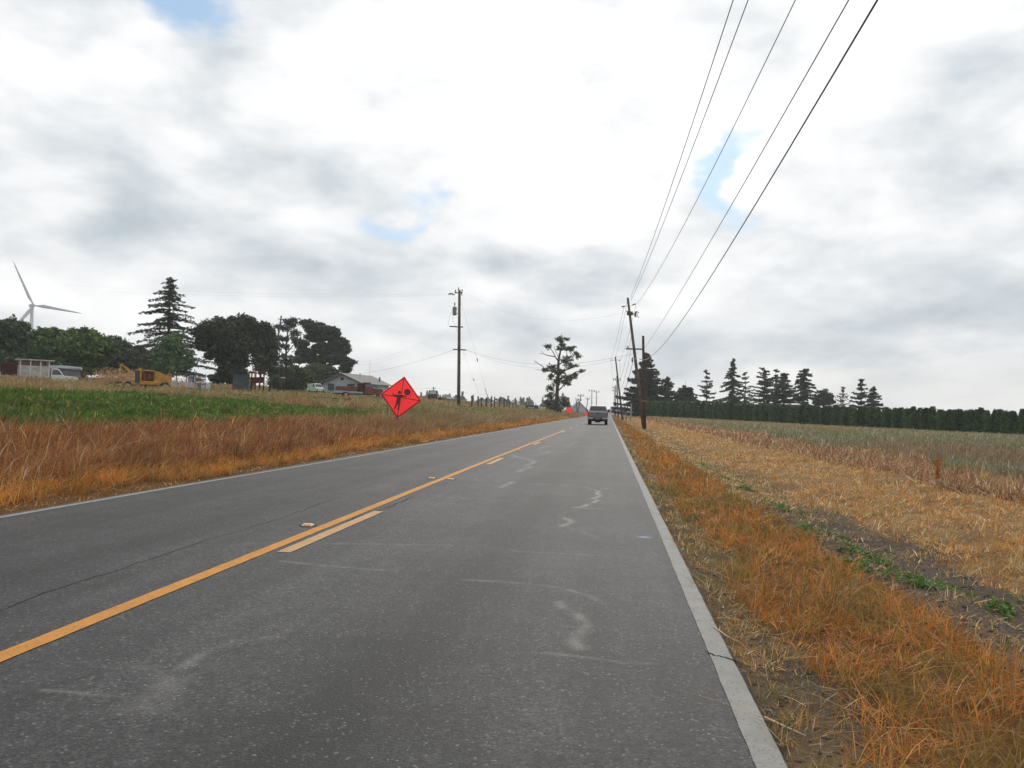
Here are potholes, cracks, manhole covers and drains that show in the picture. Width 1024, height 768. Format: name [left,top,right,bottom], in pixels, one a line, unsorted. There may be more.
crack [0,499,334,611]
